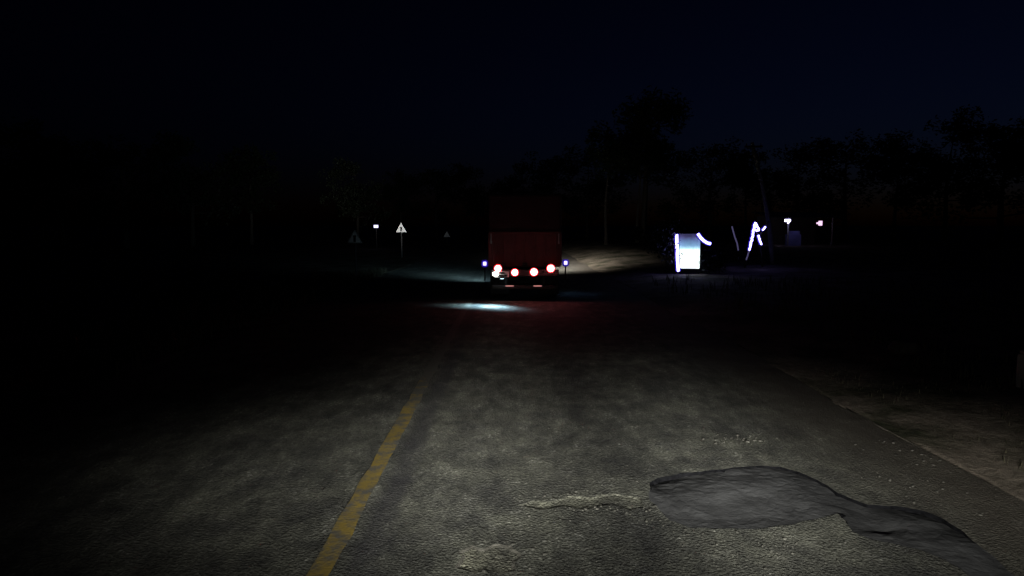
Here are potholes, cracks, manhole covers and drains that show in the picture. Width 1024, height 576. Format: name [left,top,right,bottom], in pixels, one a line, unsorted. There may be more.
pothole [649,466,1014,576]
